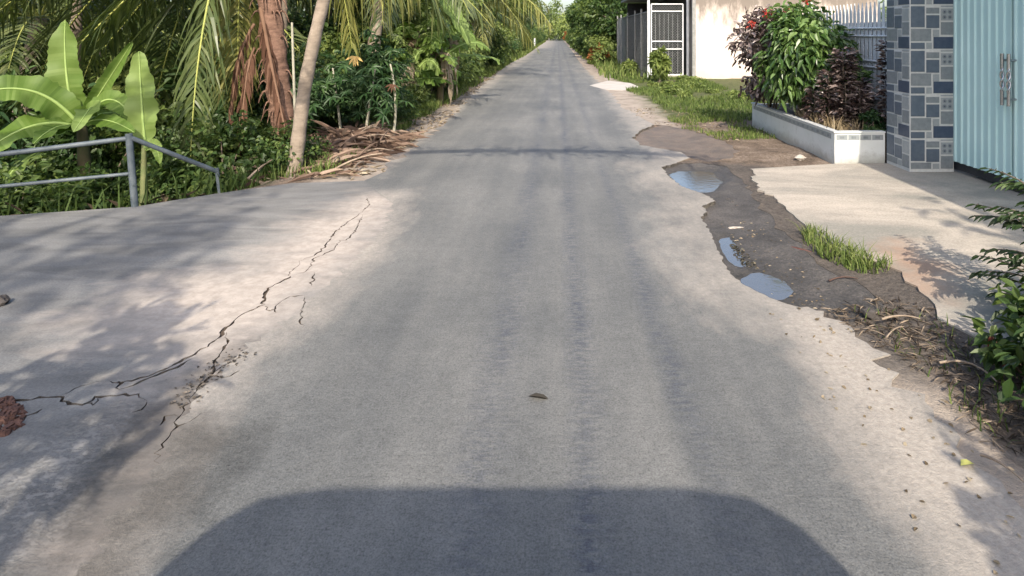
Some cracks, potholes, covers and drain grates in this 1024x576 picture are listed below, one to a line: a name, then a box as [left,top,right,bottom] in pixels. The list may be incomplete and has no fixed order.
crack [16,198,370,463]
pothole [633,125,740,162]
pothole [662,162,884,323]
